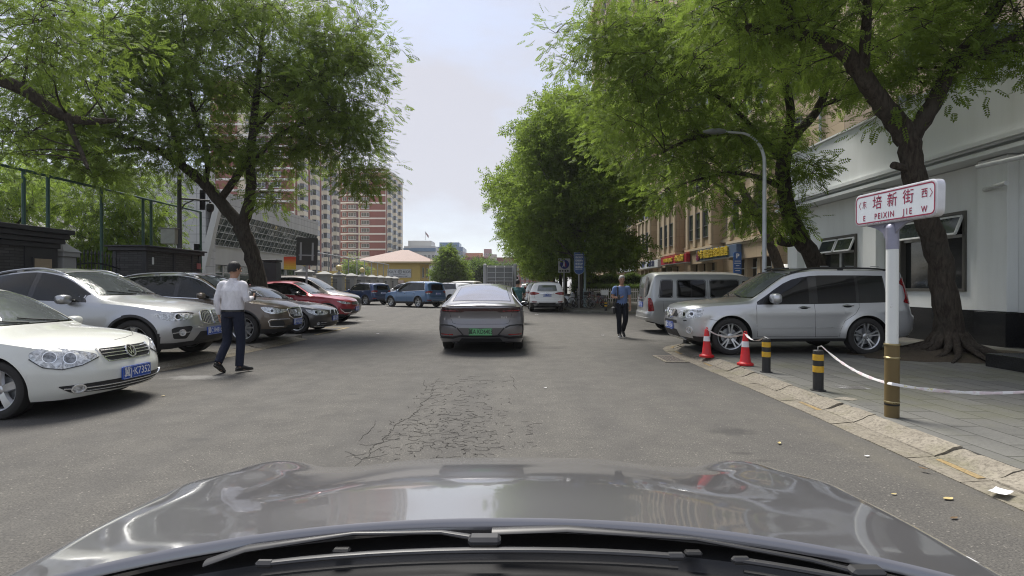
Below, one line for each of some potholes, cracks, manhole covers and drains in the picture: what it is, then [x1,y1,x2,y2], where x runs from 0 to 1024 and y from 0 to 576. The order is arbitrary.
drain grate [652,355,690,363]
crack [345,376,542,466]
